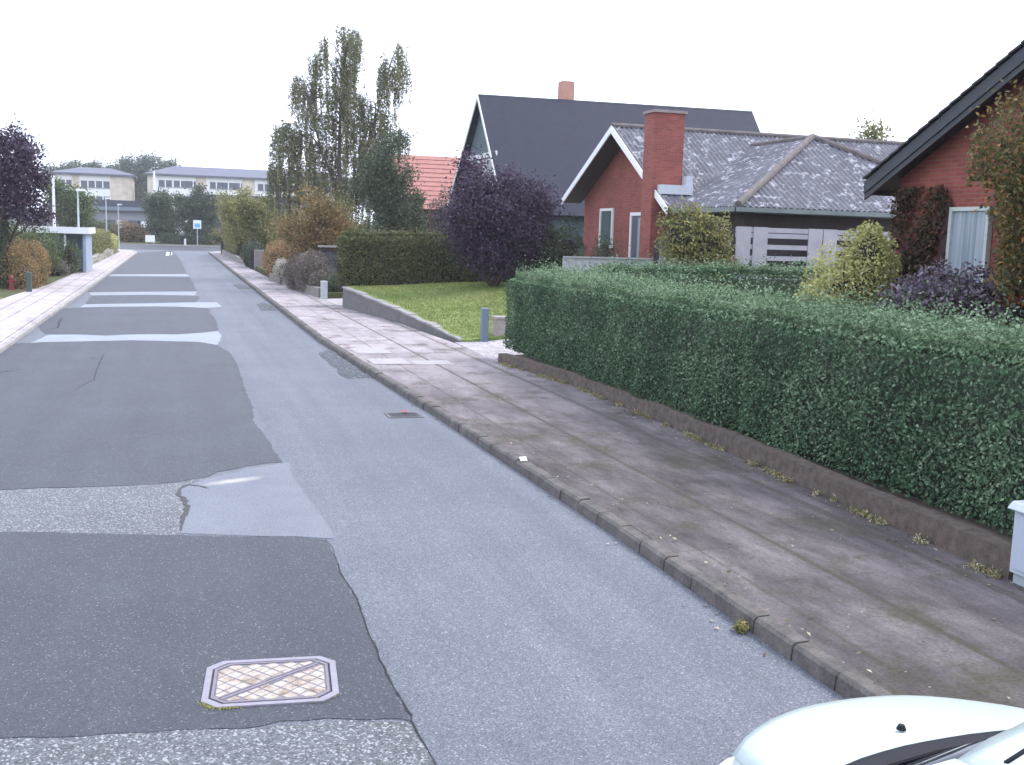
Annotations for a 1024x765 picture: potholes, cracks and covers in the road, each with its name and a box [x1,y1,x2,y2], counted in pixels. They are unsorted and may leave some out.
manhole cover [197,656,339,711]
crack [175,484,207,530]
